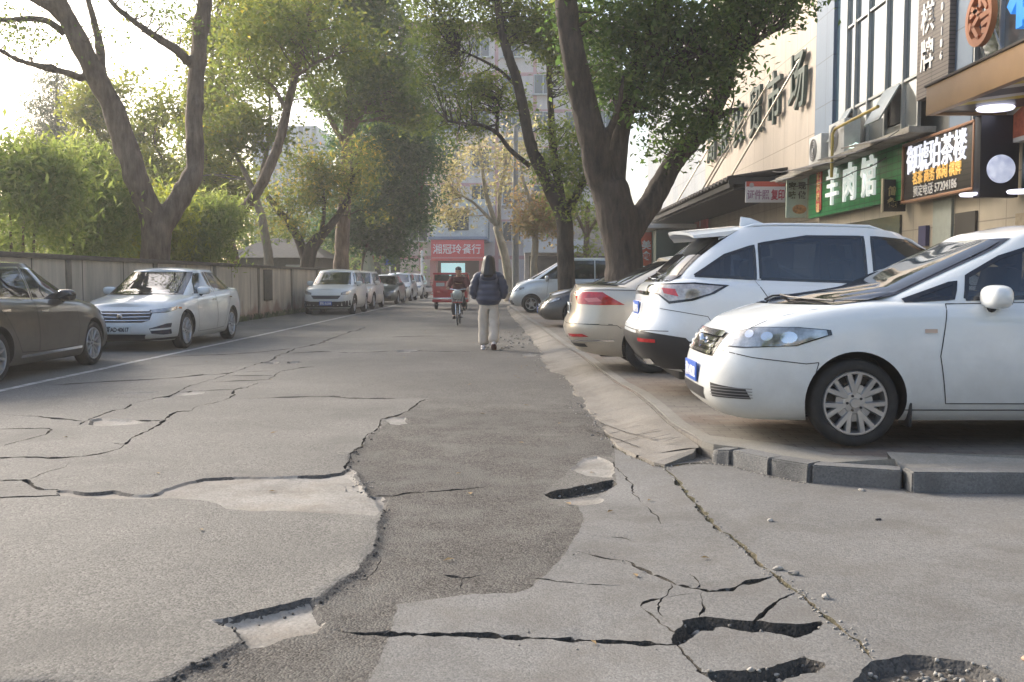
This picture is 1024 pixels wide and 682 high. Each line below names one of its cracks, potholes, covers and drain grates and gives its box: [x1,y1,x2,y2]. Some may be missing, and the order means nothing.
pothole [544,480,617,499]
crack [578,537,787,682]
crack [0,327,457,498]
crack [613,462,661,524]
pothole [853,654,1008,682]
